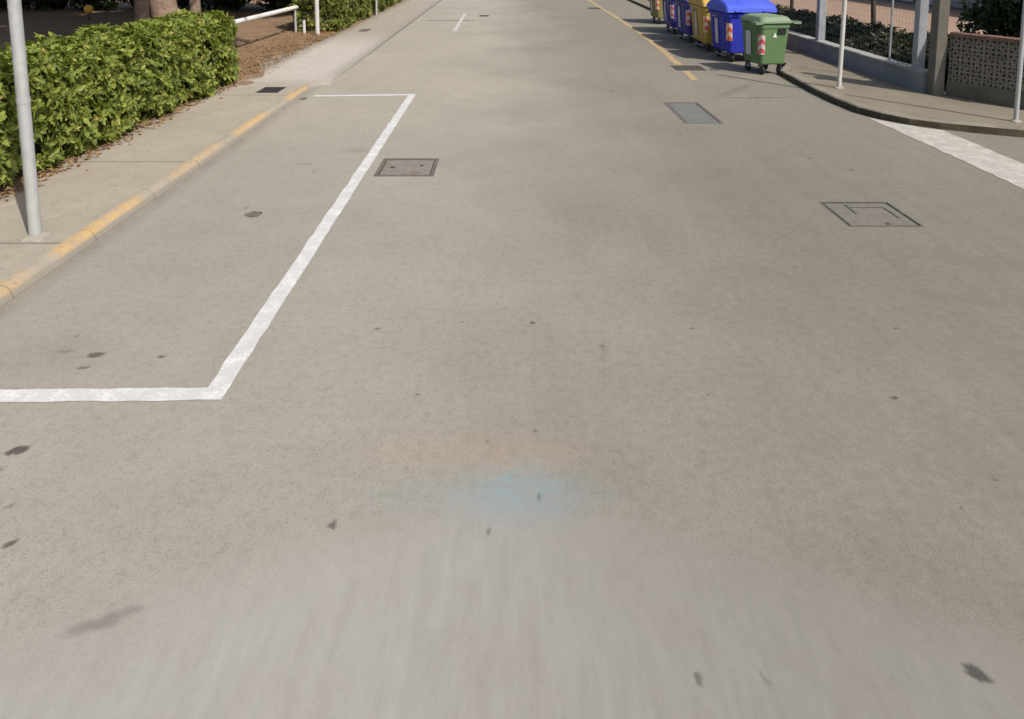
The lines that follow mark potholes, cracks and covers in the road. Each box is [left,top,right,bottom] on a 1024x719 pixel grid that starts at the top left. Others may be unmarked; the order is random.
manhole cover [663,102,724,124]
manhole cover [819,202,925,227]
manhole cover [374,158,439,176]
